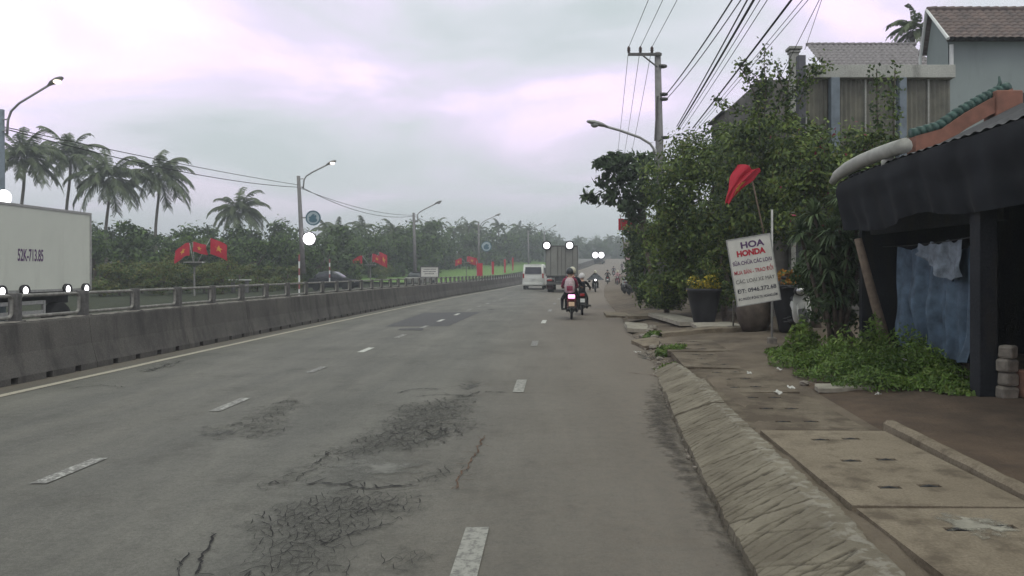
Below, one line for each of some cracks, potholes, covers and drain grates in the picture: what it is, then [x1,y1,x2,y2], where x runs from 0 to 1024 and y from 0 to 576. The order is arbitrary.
crack [229,388,501,576]
crack [175,533,217,576]
